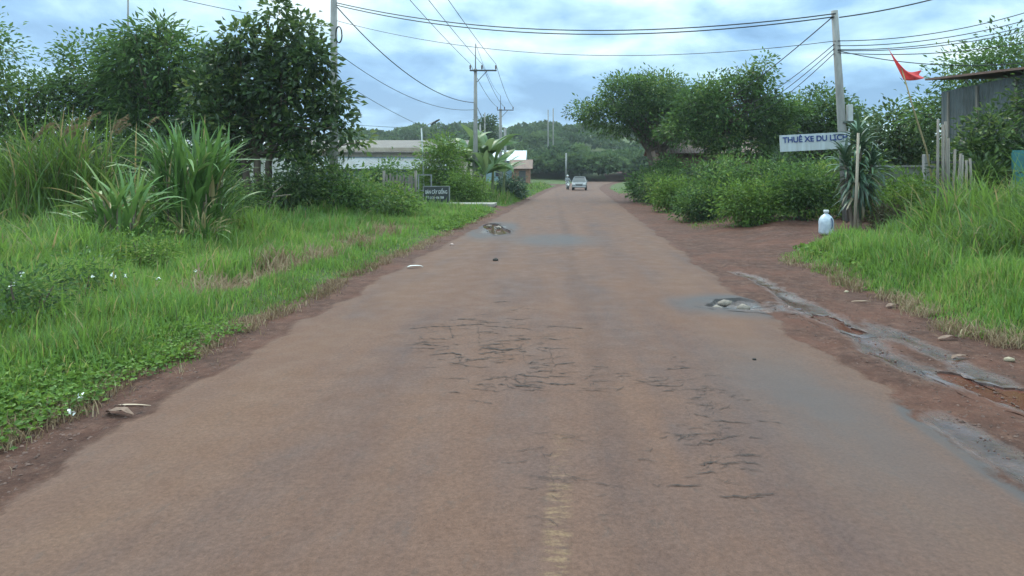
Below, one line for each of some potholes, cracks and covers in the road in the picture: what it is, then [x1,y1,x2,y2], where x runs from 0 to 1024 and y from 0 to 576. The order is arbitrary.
pothole [695,296,805,315]
pothole [481,223,513,236]
crack [410,301,628,404]
crack [598,356,783,499]
